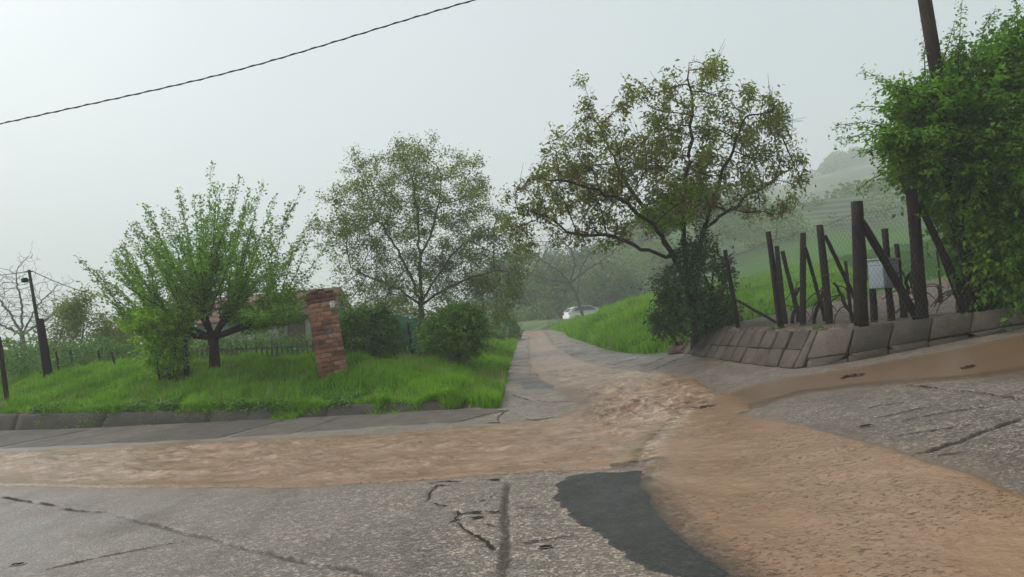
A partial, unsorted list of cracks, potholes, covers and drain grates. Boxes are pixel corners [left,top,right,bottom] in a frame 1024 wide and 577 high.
crack [869,385,1021,457]
crack [51,541,183,569]
crack [427,478,499,548]
